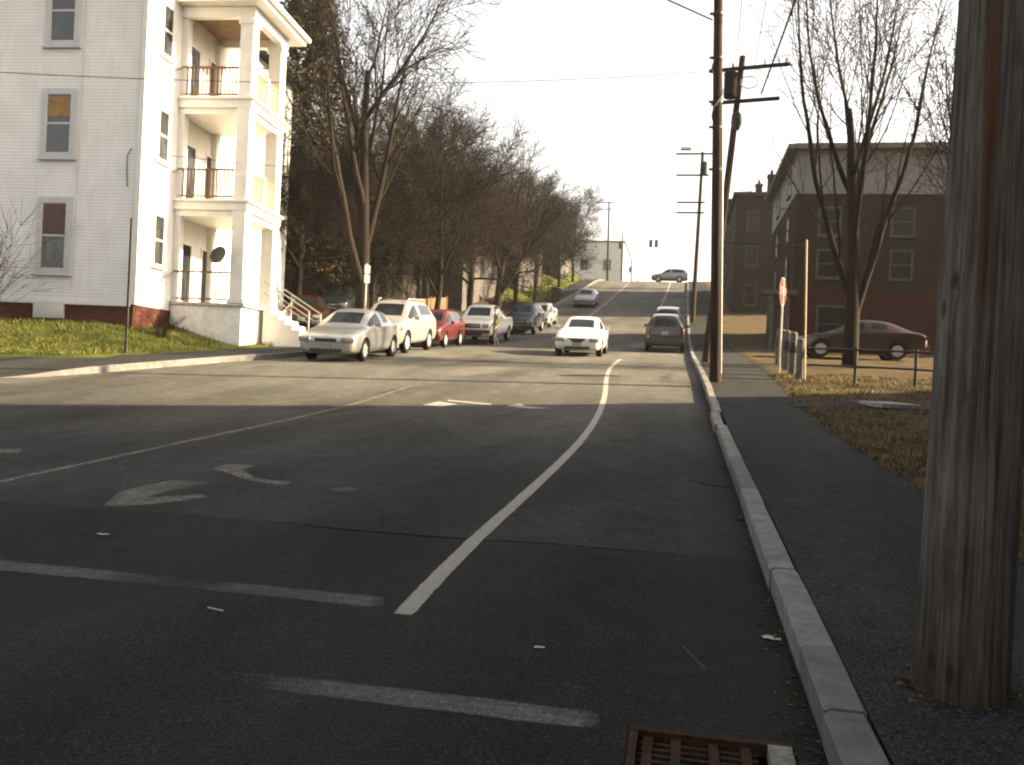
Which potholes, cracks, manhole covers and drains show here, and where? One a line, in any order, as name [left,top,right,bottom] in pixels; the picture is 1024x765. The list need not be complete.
drain grate [625,725,796,765]
